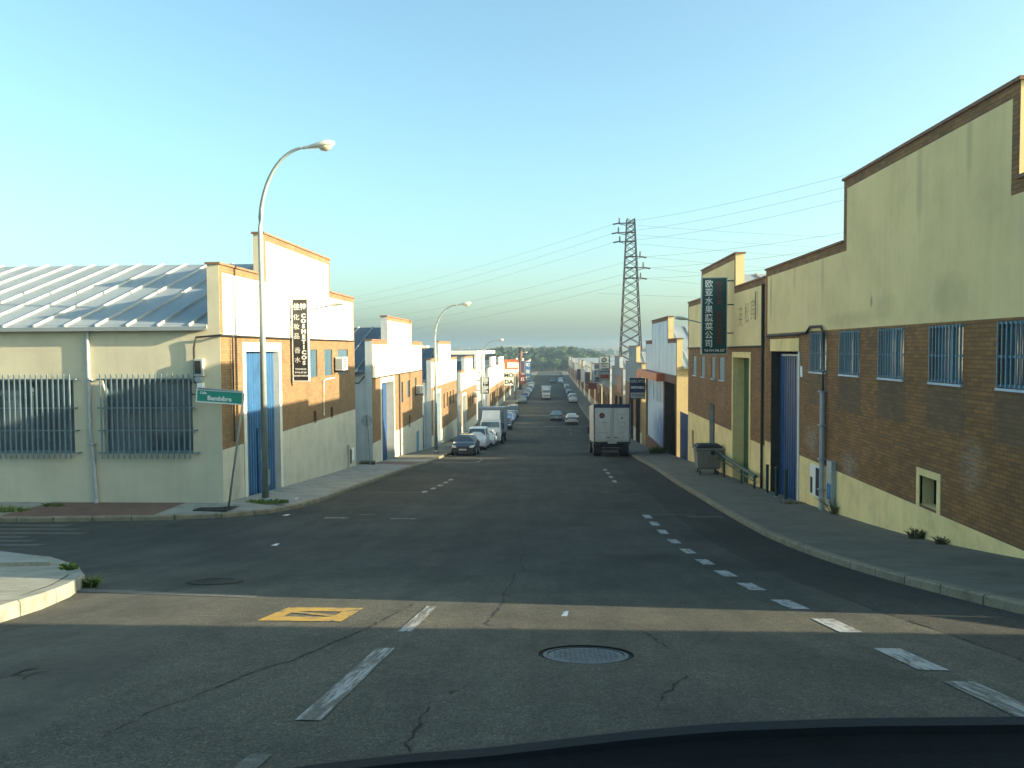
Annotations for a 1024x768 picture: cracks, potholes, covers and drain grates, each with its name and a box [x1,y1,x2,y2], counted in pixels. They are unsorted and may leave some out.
crack [0,666,51,679]
crack [484,542,580,628]
crack [660,676,688,701]
manhole cover [539,647,633,664]
crack [404,682,471,753]
